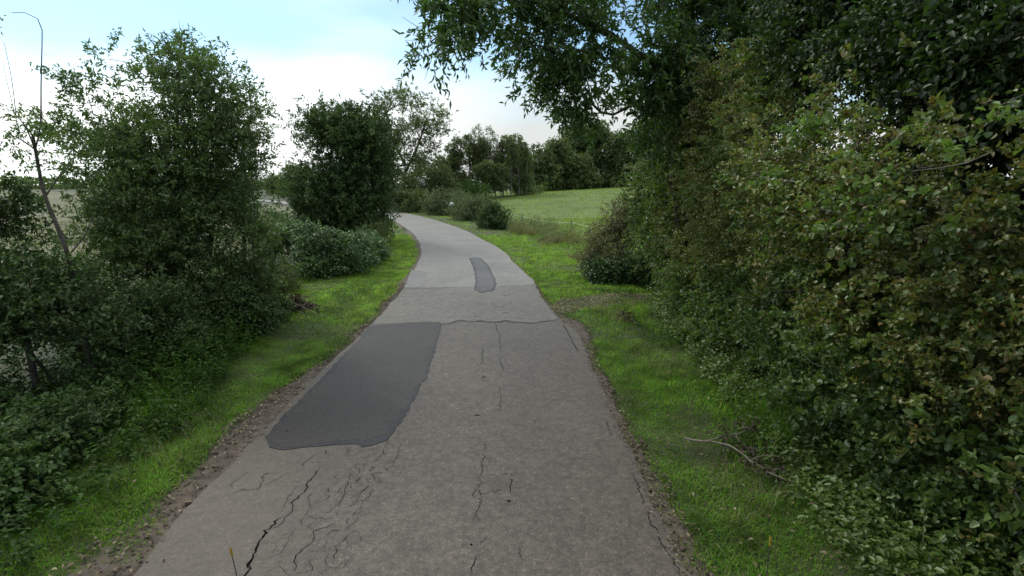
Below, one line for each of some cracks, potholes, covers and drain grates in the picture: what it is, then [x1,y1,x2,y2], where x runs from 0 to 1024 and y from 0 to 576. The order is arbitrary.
crack [450,306,680,576]
crack [231,443,401,576]
